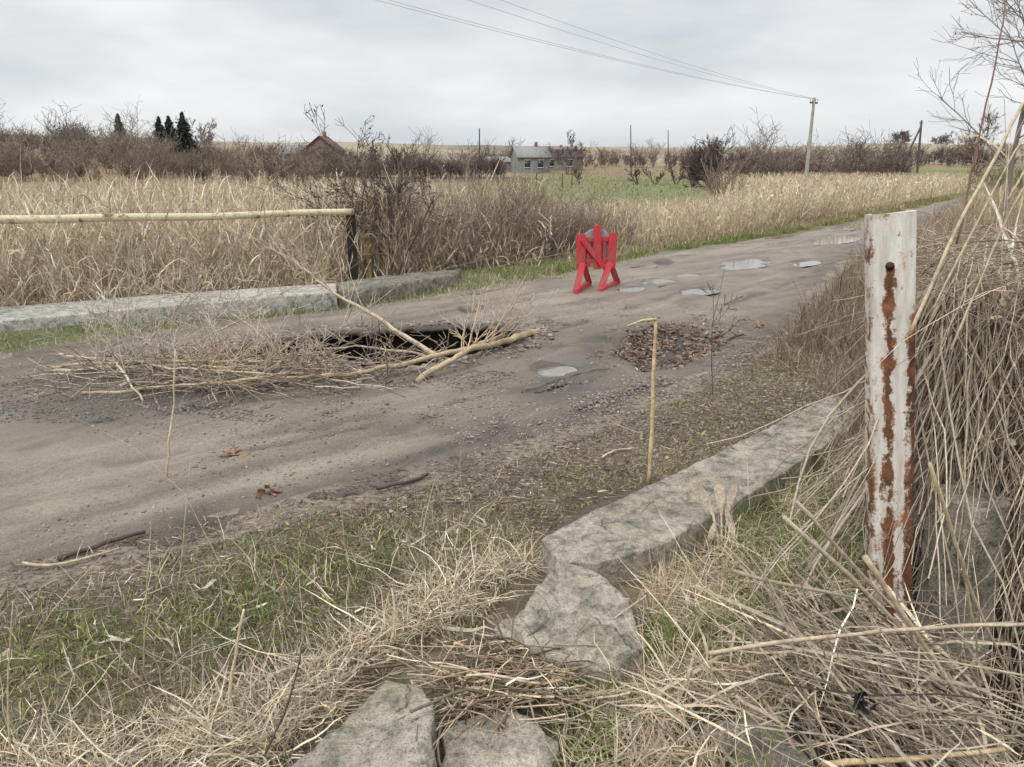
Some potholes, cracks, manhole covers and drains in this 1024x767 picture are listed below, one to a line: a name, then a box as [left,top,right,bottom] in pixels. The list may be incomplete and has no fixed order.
pothole [603,284,659,295]
pothole [198,320,546,387]
pothole [665,284,734,300]
pothole [586,317,748,390]
pothole [510,356,606,385]
pothole [703,255,794,274]
pothole [793,234,865,247]
pothole [770,258,836,271]
